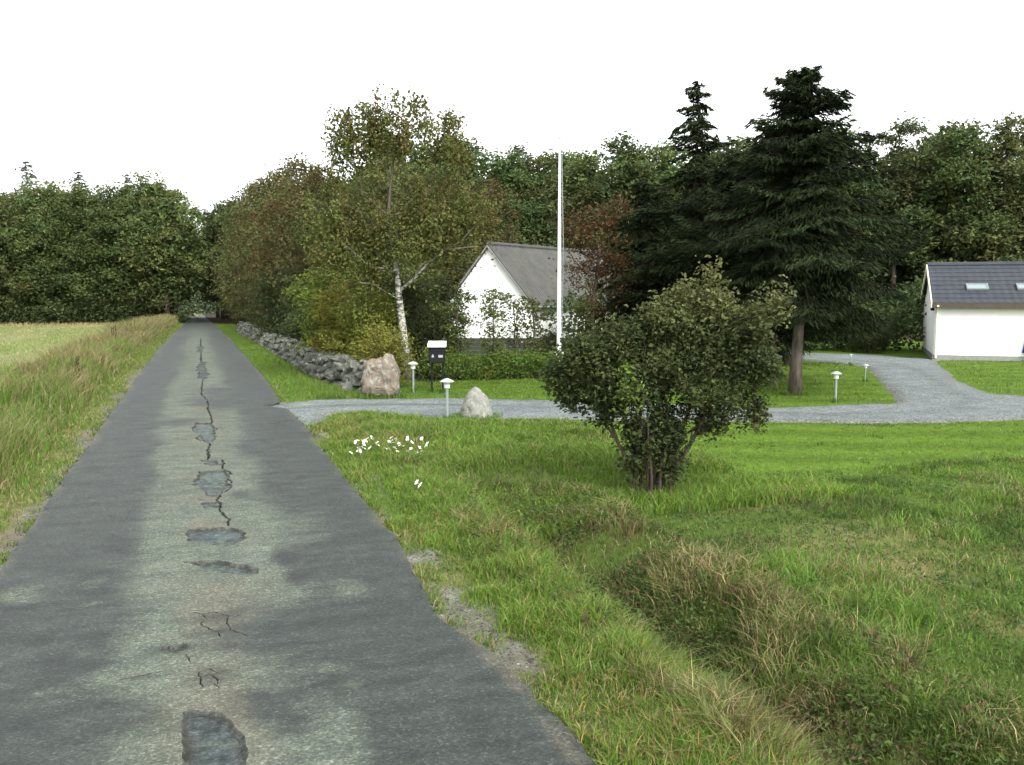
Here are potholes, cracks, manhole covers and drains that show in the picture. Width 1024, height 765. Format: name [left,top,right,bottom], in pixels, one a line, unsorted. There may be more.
pothole [185,527,247,546]
pothole [160,642,191,653]
crack [116,654,232,689]
pothole [195,362,211,380]
crack [194,612,249,637]
pothole [183,560,259,576]
pothole [181,709,249,765]
pothole [191,422,217,443]
crack [172,380,234,526]
pothole [192,470,232,498]
